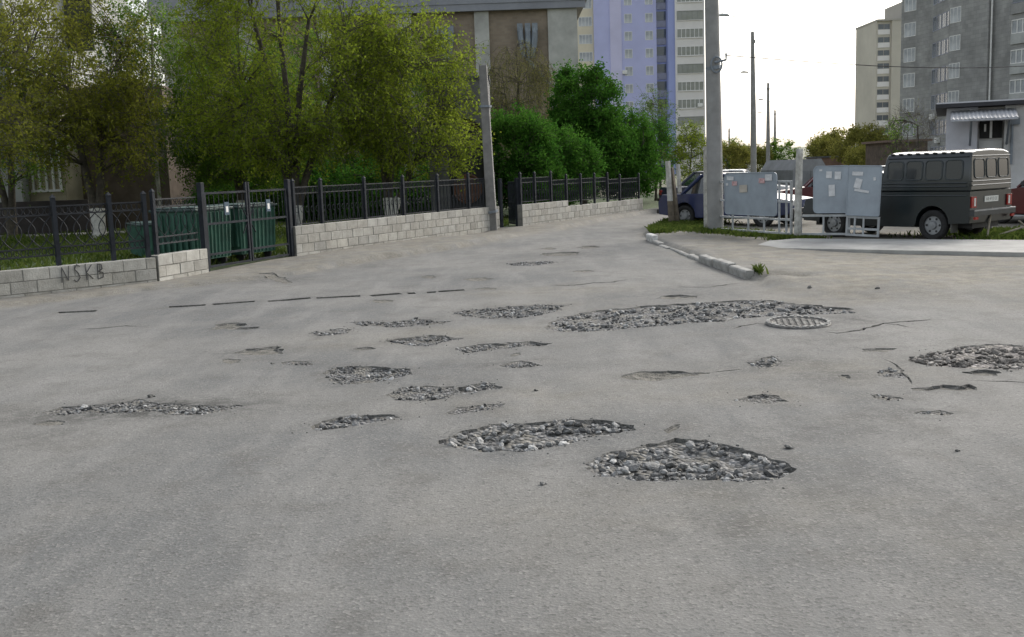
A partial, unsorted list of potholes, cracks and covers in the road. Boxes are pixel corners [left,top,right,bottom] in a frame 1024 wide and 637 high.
crack [830,320,924,333]
pothole [620,371,709,381]
pothole [292,414,420,433]
pothole [42,399,242,416]
pothole [451,379,503,394]
pothole [727,391,799,407]
pothole [386,333,463,347]
pothole [321,364,420,385]
pothole [583,432,797,489]
pothole [446,341,552,355]
pothole [377,382,467,404]
pothole [453,304,572,319]
